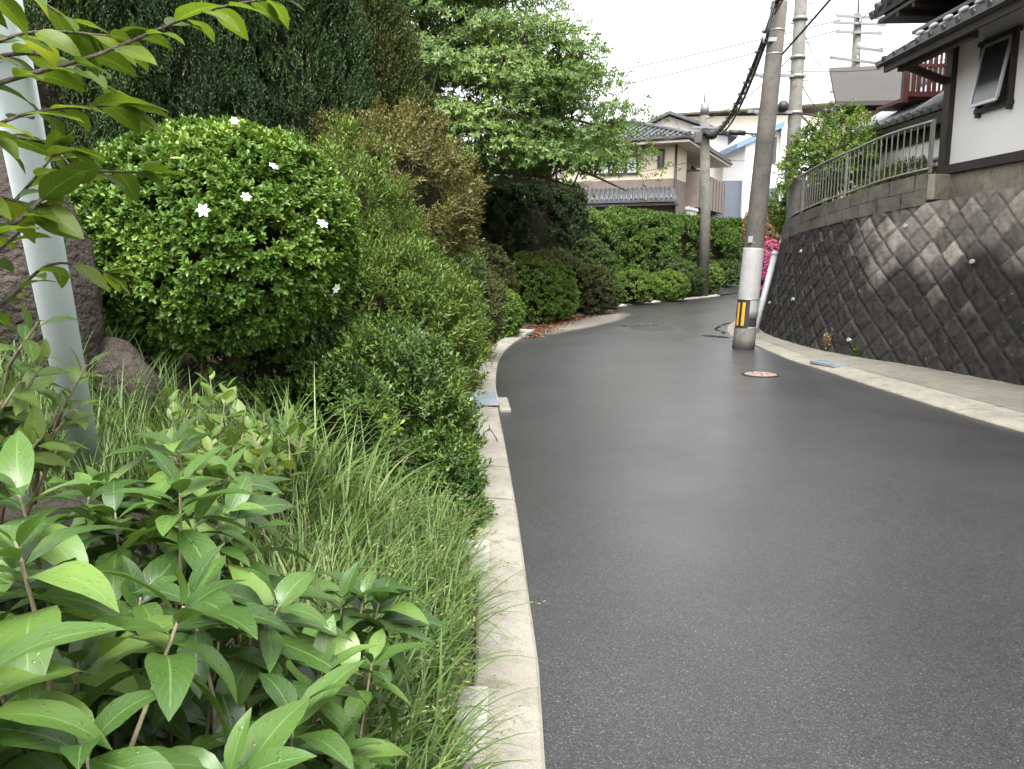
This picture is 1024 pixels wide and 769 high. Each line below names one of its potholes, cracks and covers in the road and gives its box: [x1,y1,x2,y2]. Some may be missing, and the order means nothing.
drain grate [809,360,850,368]
drain grate [471,391,499,407]
